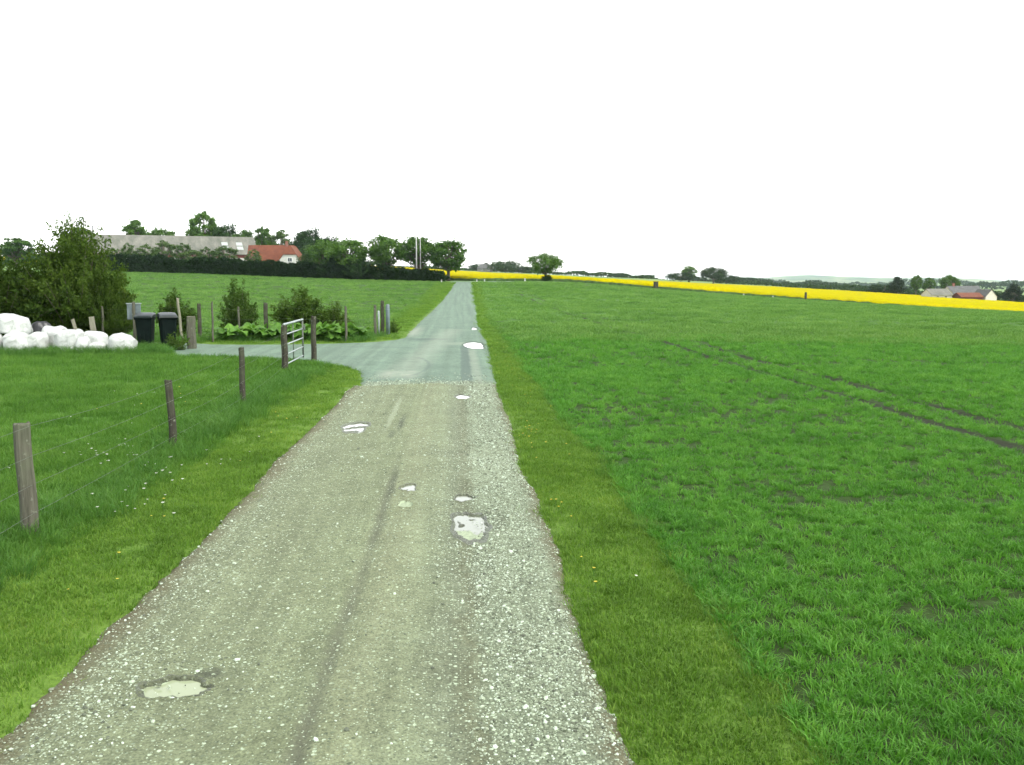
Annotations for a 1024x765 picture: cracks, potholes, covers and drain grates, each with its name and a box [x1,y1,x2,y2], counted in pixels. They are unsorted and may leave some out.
pothole [130,674,219,701]
pothole [452,494,479,503]
pothole [339,421,373,435]
pothole [397,483,418,492]
pothole [461,341,488,350]
pothole [448,511,495,548]
